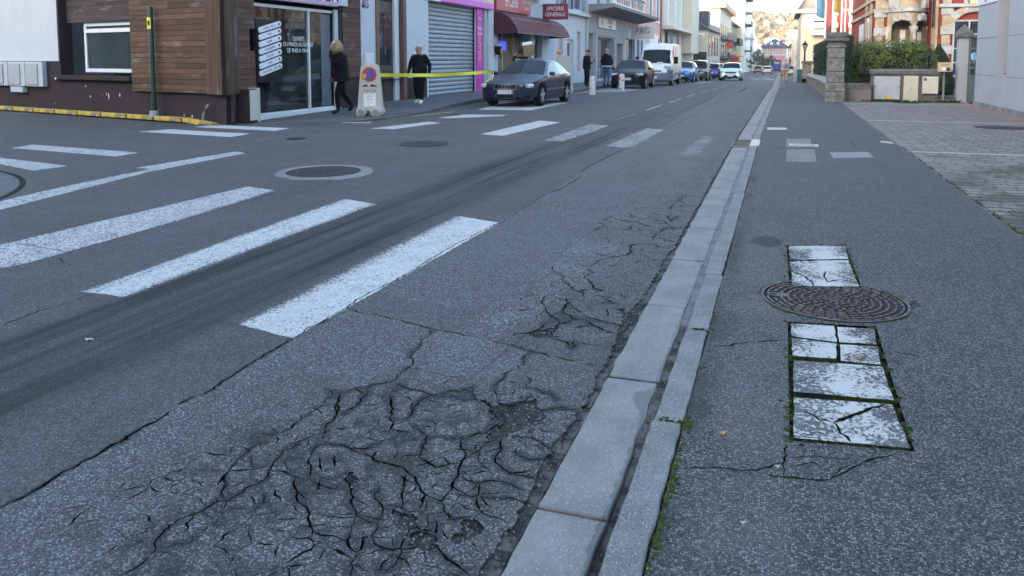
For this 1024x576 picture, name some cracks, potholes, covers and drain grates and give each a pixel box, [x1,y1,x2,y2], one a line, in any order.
crack [685,404,899,481]
crack [2,86,748,576]
manhole cover [761,280,920,327]
manhole cover [274,165,374,180]
